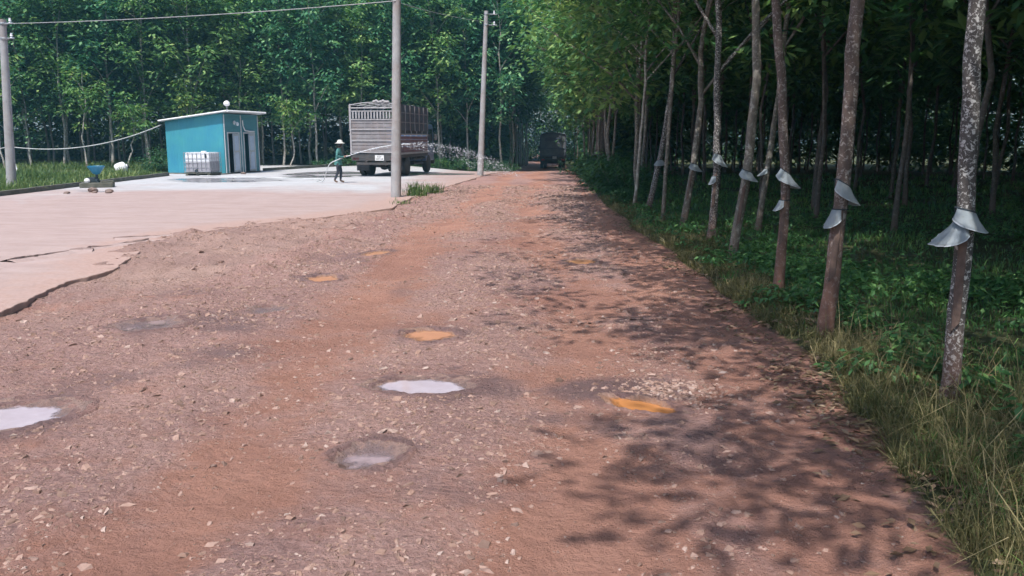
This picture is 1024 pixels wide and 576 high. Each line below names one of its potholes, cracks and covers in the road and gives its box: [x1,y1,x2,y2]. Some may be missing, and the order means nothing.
pothole [559,257,603,266]
pothole [100,314,196,334]
pothole [299,273,346,283]
pothole [351,373,494,397]
pothole [588,390,695,416]
pothole [391,326,467,344]
pothole [318,436,417,477]
pothole [0,394,100,436]
crack [3,235,170,263]
